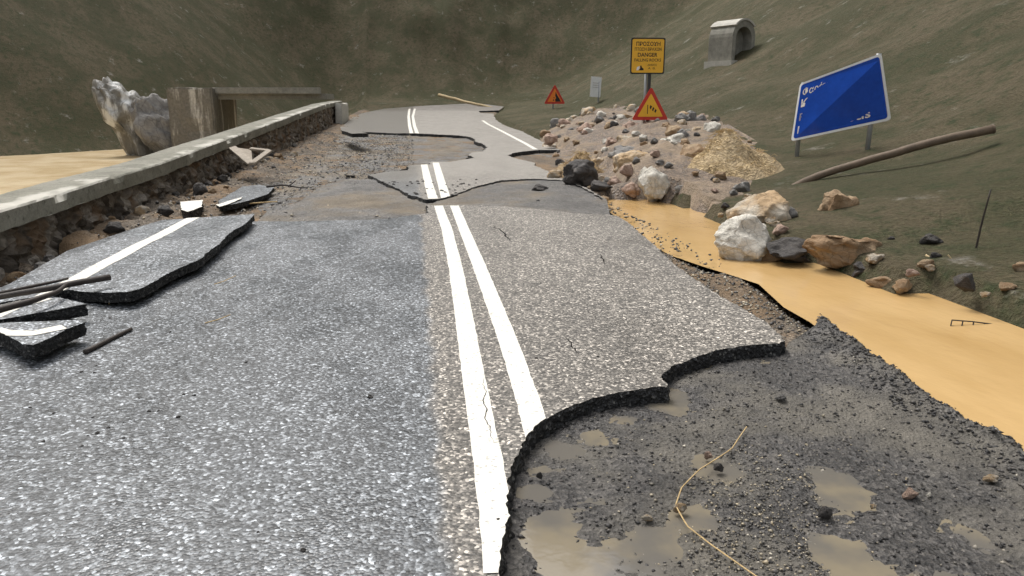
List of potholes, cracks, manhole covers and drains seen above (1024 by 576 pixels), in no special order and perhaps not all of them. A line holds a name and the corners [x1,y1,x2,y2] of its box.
pothole [498,315,1024,576]
